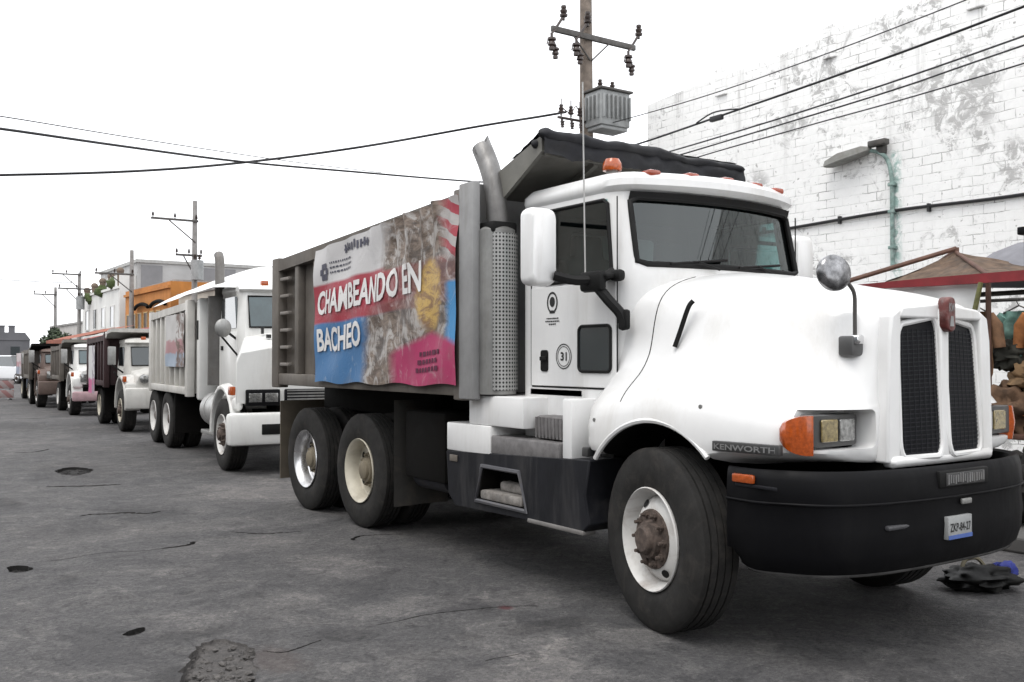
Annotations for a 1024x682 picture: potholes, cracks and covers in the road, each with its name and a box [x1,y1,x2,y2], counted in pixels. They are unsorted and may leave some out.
pothole [178,639,260,682]
crack [267,640,321,653]
pothole [122,627,145,636]
crack [54,541,195,561]
pothole [54,467,93,476]
pothole [7,565,33,573]
crack [378,595,533,625]
